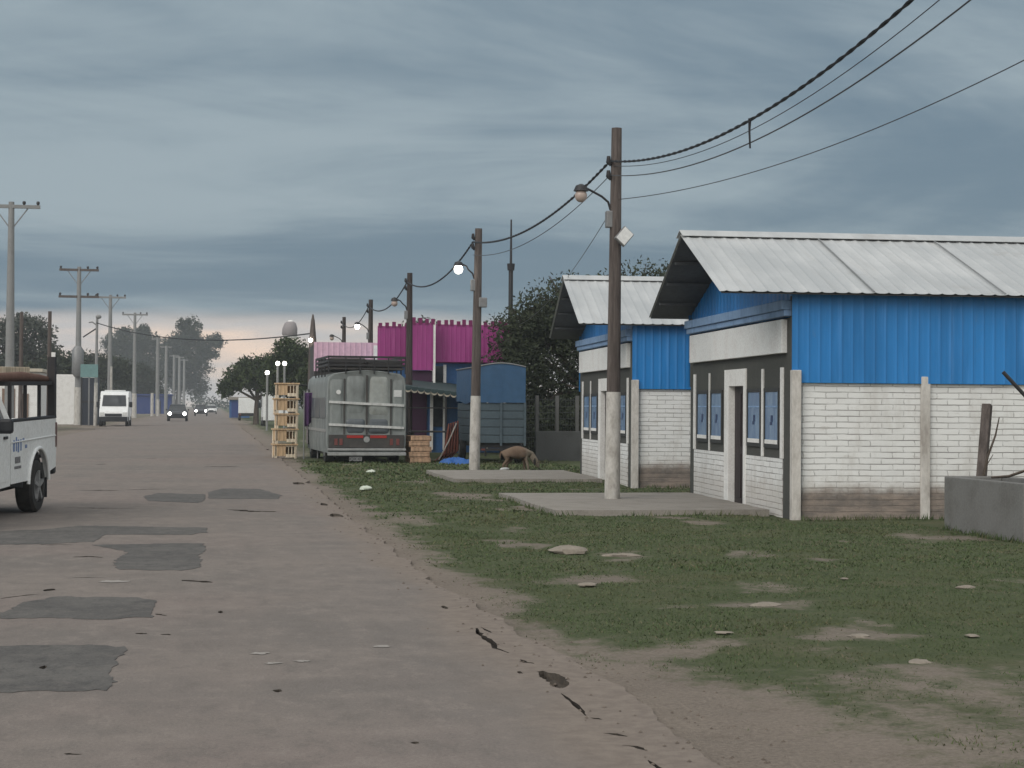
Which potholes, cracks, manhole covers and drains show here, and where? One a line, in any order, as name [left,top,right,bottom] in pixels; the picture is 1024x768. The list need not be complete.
crack [562,694,661,768]
pothole [539,671,569,694]
crack [476,627,534,664]
